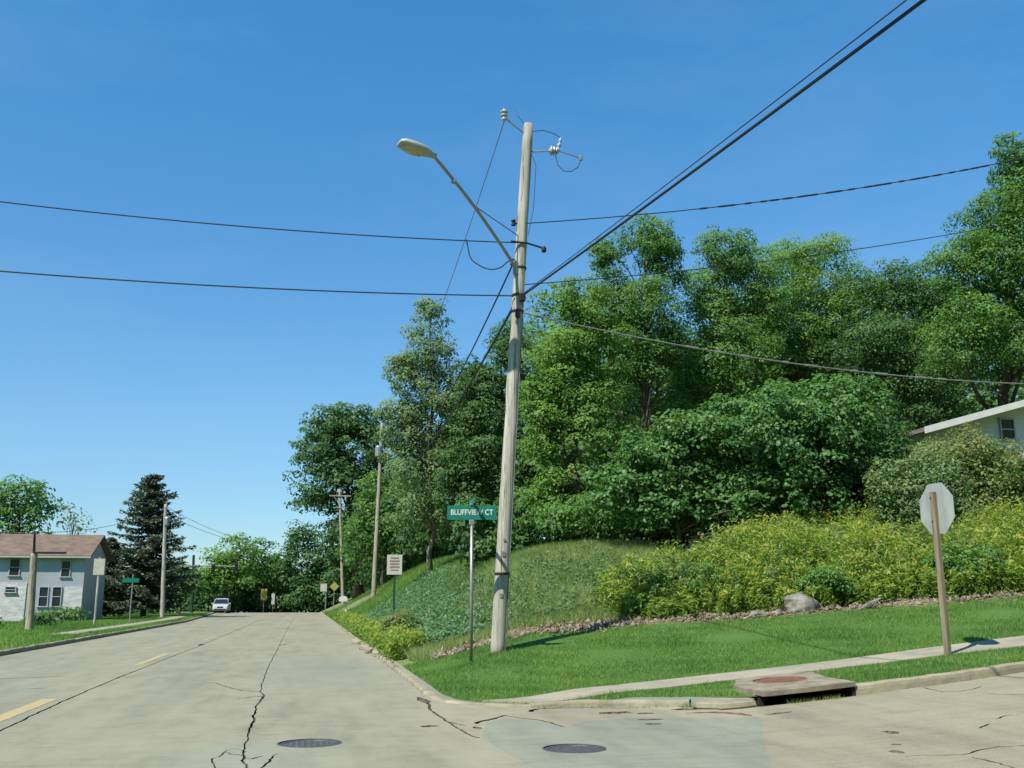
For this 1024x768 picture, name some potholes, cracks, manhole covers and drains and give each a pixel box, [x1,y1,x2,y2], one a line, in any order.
manhole cover [542,744,607,753]
manhole cover [277,738,342,748]
crack [210,620,293,768]
crack [907,745,1024,768]
drain grate [734,672,856,707]
crack [425,702,615,738]
